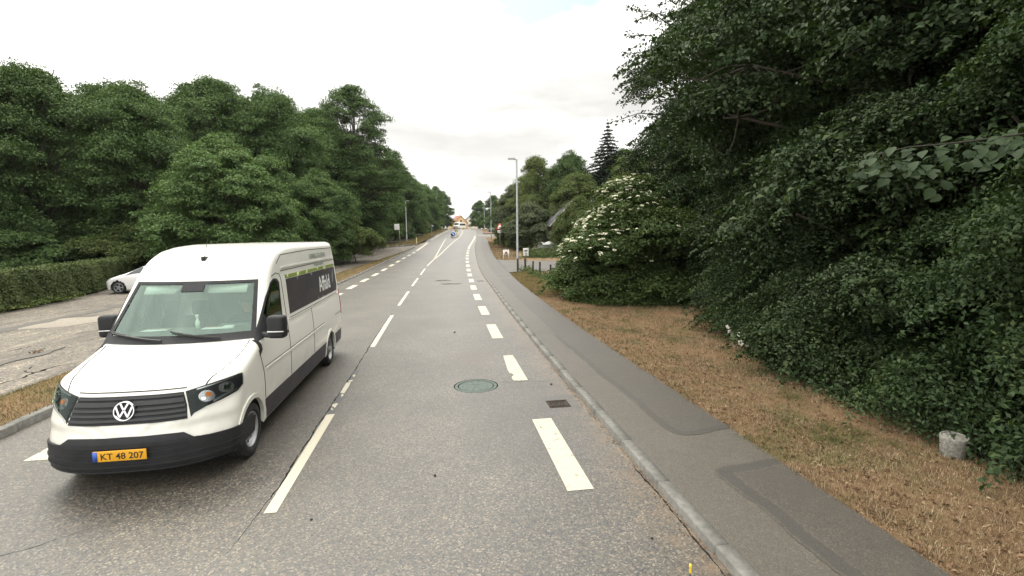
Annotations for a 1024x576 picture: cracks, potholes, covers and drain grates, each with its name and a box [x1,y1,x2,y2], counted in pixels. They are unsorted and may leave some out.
manhole cover [455,379,497,393]
crack [0,344,67,384]
drain grate [546,400,571,408]
